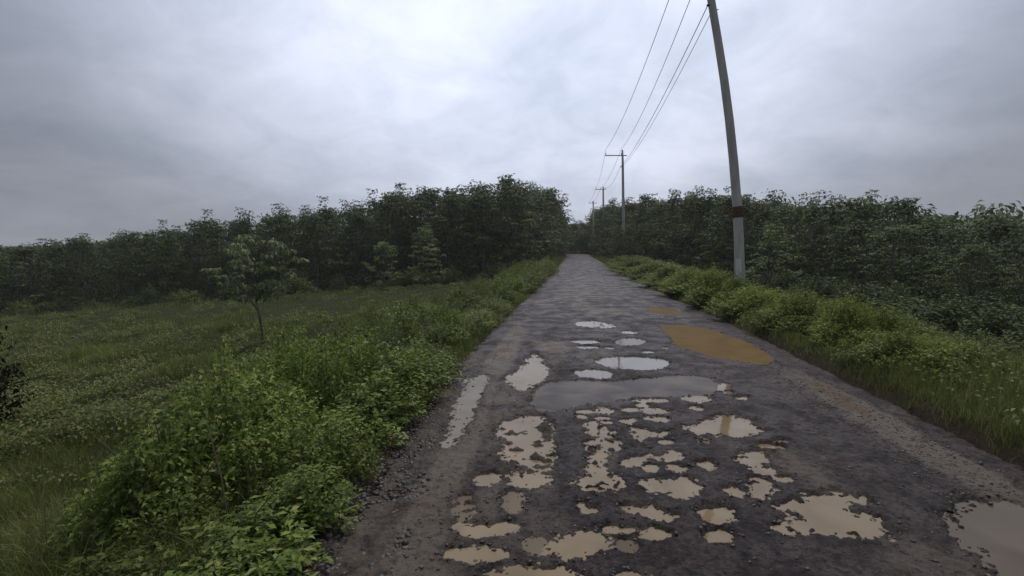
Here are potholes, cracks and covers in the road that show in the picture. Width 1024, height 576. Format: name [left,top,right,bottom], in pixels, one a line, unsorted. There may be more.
pothole [496,350,556,392]
pothole [630,472,716,503]
pothole [750,483,916,546]
pothole [587,353,677,372]
pothole [568,319,620,329]
pothole [611,533,658,562]
pothole [917,488,1024,576]
pothole [510,526,551,559]
pothole [420,536,520,572]
pothole [655,323,783,366]
pothole [557,419,635,497]
pothole [501,466,562,495]
